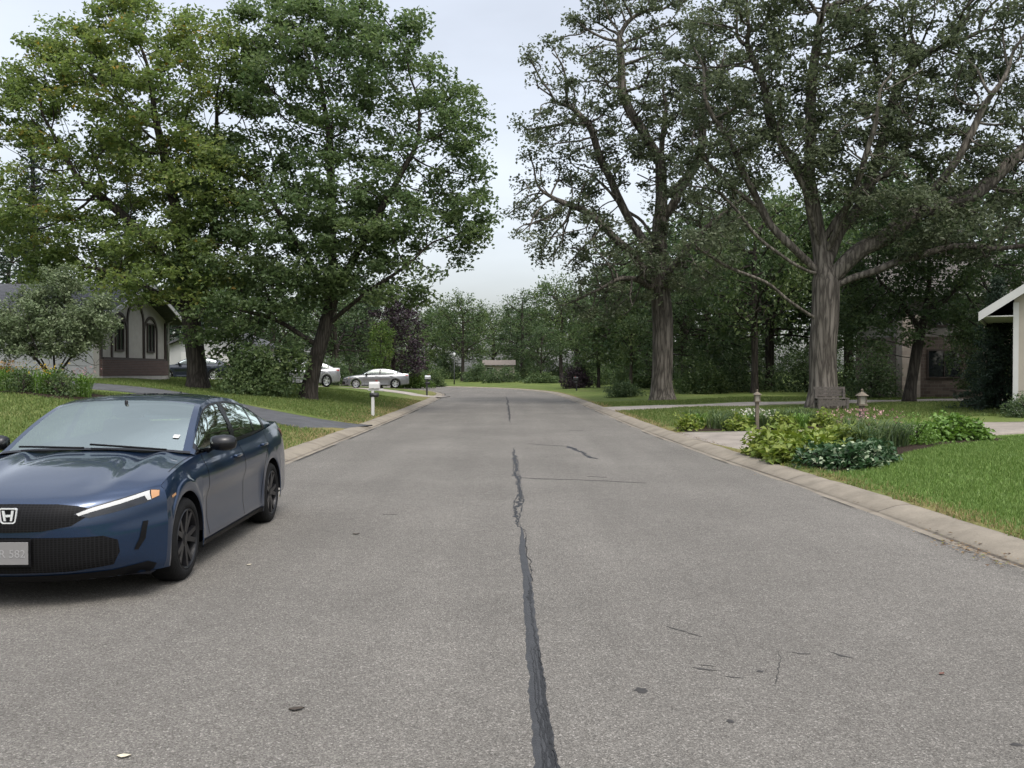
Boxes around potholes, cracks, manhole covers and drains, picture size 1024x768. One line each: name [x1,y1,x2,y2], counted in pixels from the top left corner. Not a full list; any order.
crack [693,665,741,678]
crack [537,430,597,459]
